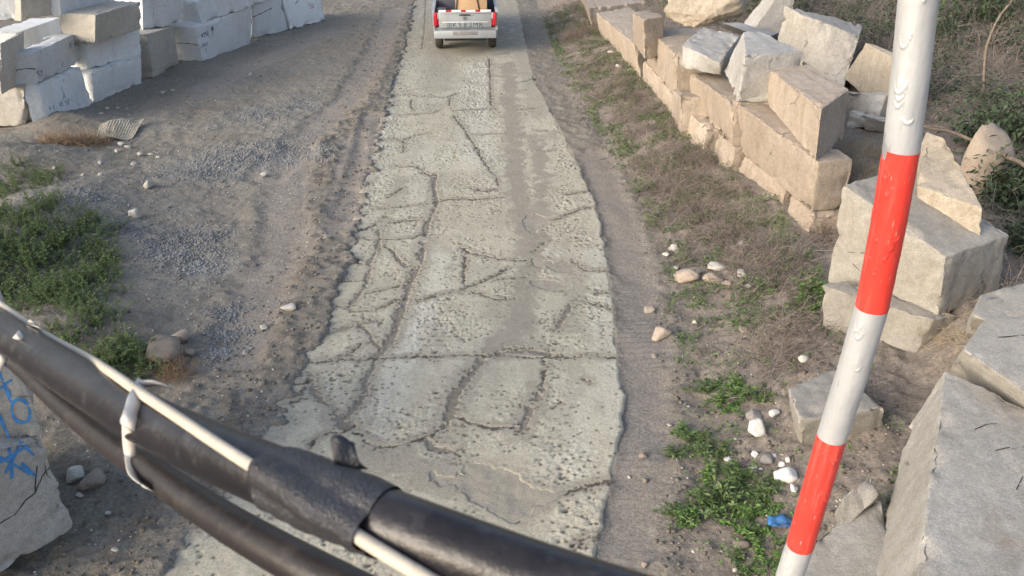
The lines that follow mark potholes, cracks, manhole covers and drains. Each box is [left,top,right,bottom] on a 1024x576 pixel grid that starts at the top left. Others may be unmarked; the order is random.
crack [275,60,546,455]
crack [540,292,611,331]
crack [564,479,613,496]
